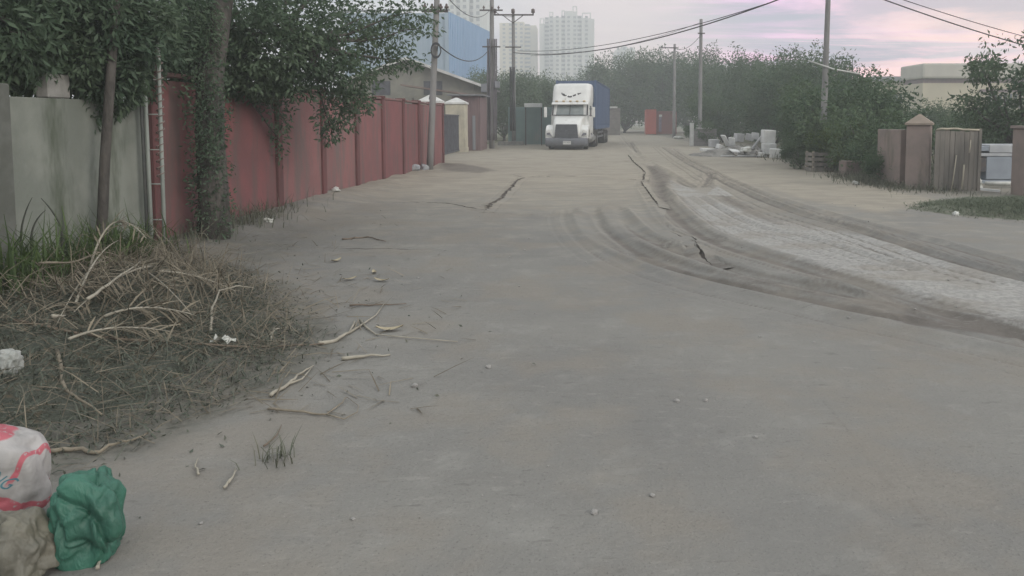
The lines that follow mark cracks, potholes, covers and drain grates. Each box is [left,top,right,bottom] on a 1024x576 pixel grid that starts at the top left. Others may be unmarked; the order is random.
crack [611,155,670,209]
crack [391,173,583,217]
crack [640,230,734,269]
